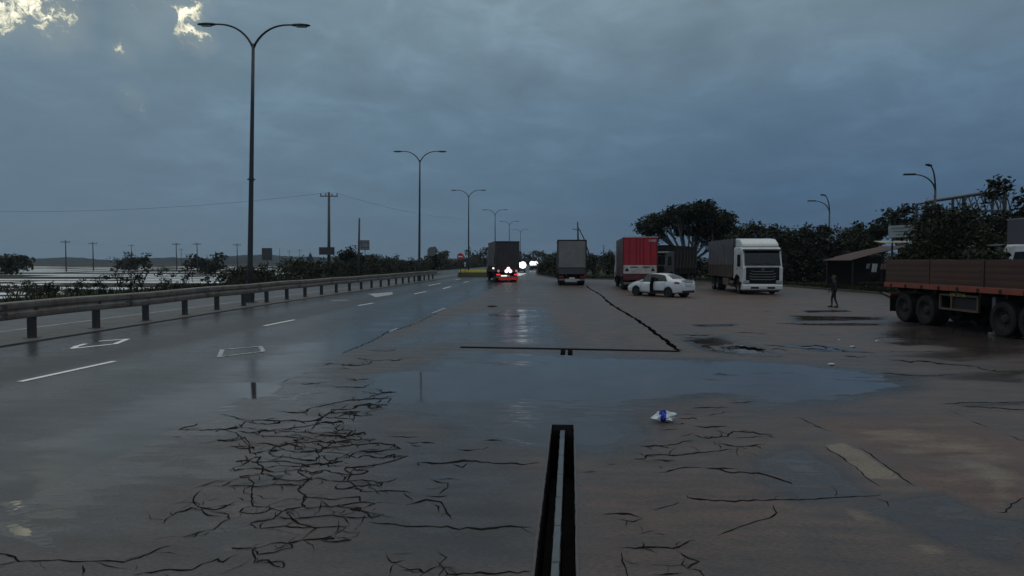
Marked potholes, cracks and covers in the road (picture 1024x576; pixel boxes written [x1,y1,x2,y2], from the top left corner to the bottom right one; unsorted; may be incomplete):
crack [947,402,1024,440]
crack [608,401,910,576]
crack [150,350,539,570]
pothole [709,343,782,357]
crack [386,552,526,576]
